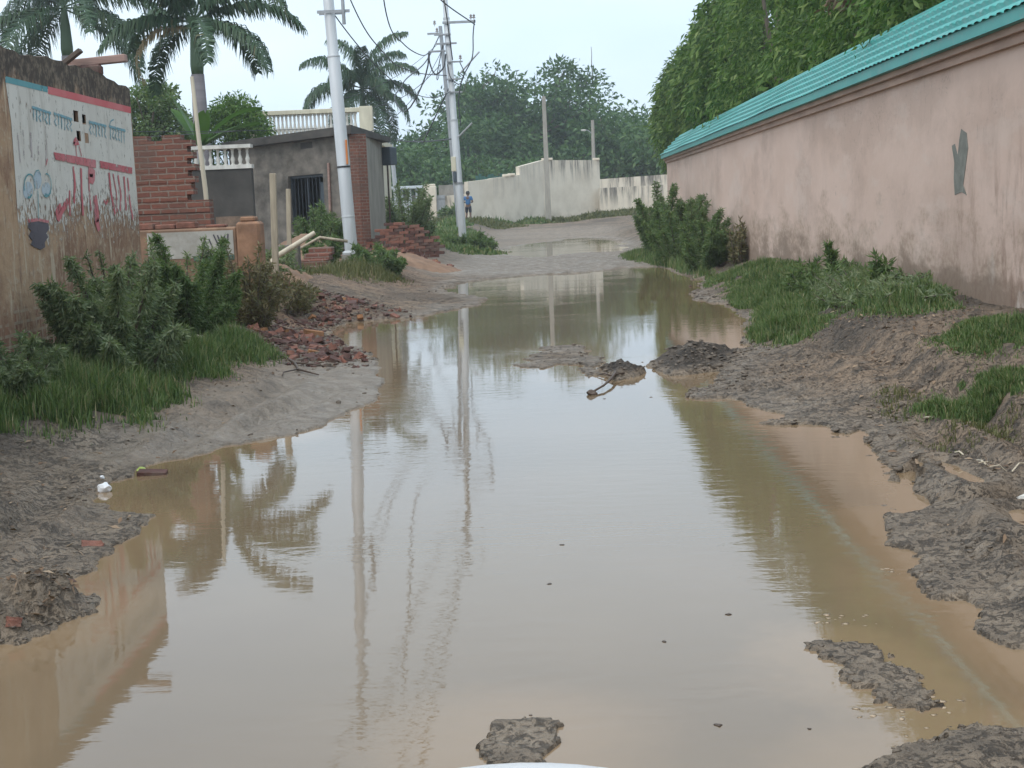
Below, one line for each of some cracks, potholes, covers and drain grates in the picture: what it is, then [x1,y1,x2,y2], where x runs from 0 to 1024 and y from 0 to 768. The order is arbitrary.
pothole [498,237,629,257]
